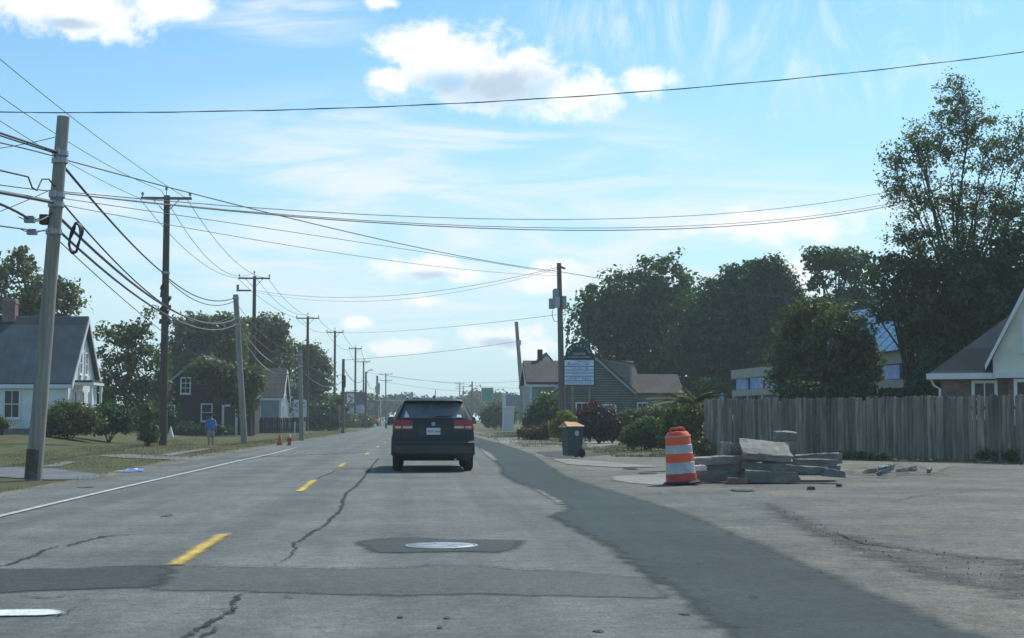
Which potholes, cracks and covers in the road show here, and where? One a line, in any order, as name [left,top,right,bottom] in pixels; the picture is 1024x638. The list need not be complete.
crack [271,458,378,566]
crack [180,593,243,638]
